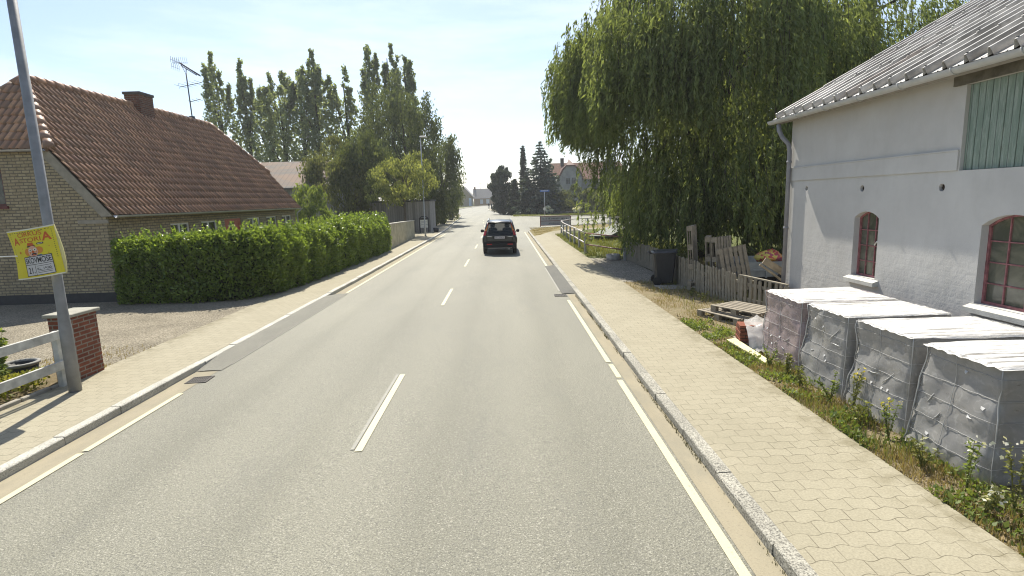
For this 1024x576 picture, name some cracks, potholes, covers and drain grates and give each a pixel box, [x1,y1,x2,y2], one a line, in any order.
drain grate [184,375,215,384]
